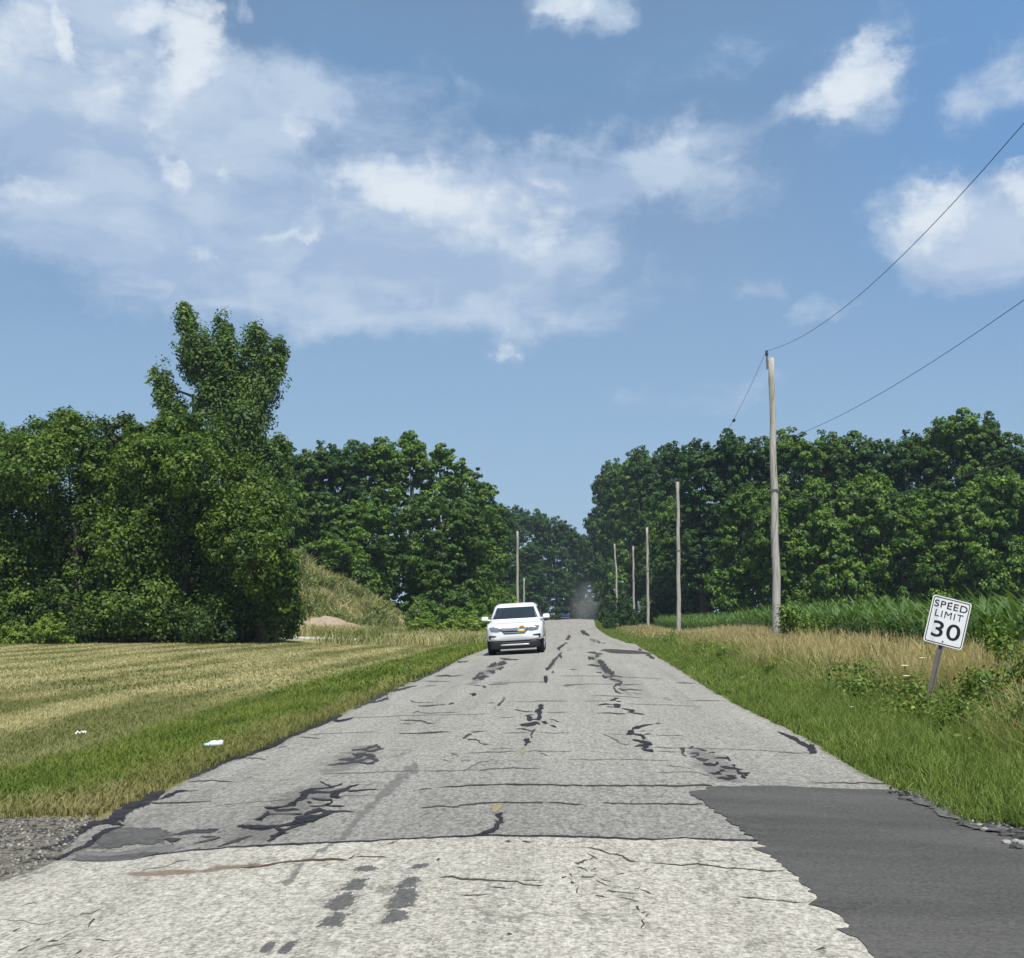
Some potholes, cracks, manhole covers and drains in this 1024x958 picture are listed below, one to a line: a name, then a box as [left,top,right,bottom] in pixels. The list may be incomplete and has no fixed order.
crack [142,835,396,871]
crack [562,847,784,935]
